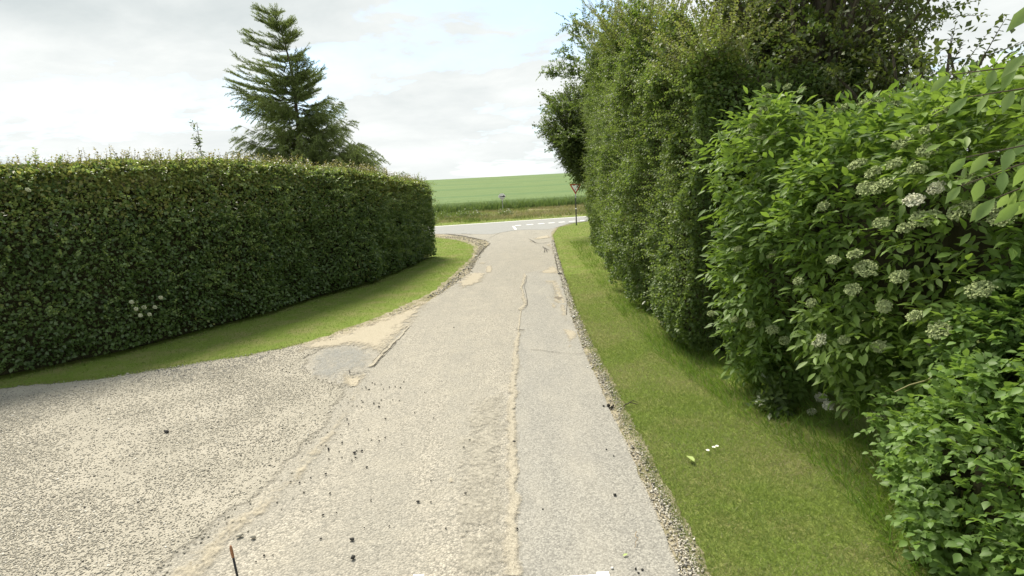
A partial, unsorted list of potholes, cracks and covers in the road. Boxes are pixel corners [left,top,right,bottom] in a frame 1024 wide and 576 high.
crack [349,325,410,373]
crack [518,273,528,332]
